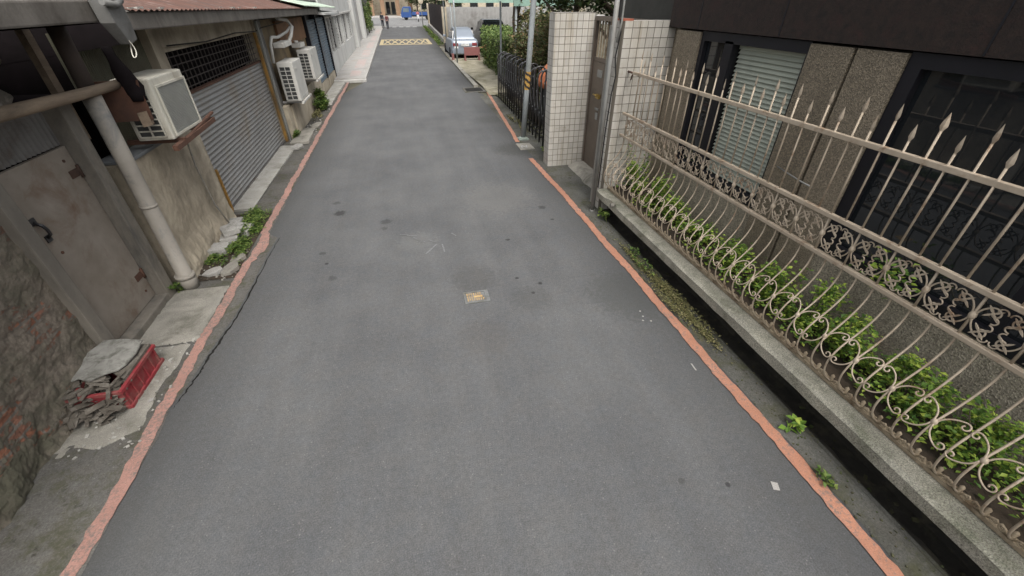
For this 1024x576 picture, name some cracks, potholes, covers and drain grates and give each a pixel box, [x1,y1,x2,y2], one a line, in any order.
manhole cover [463,289,491,304]
